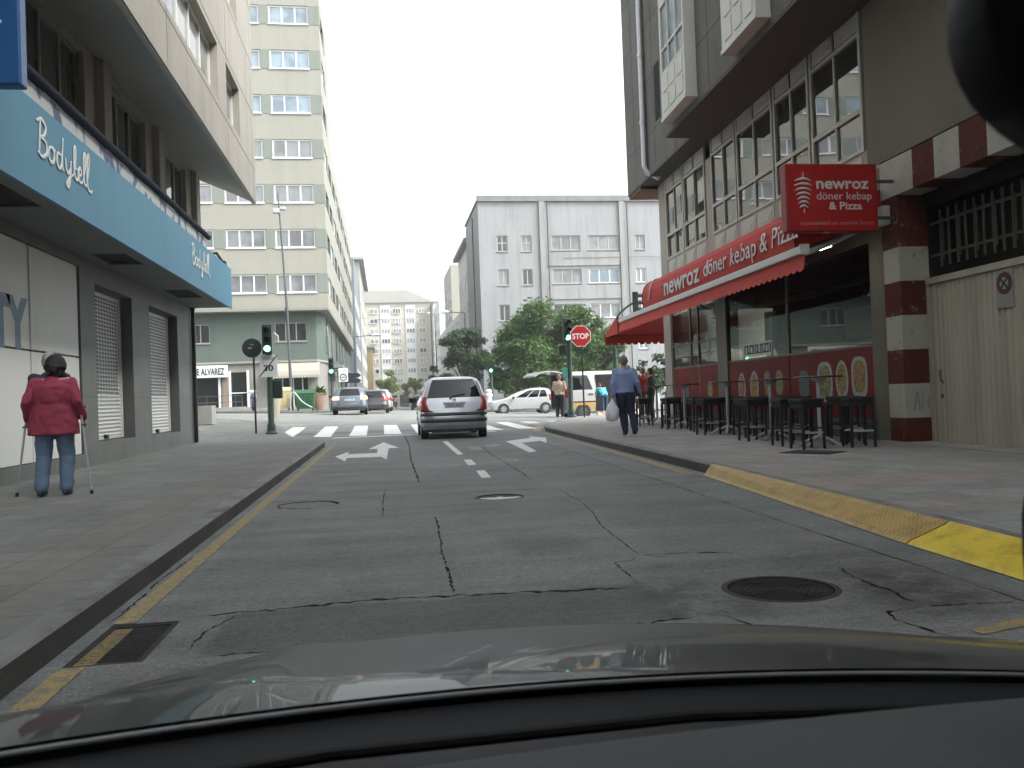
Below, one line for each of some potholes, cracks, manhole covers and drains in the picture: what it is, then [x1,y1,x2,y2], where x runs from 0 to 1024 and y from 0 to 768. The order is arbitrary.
crack [638,615,751,624]
manhole cover [721,576,842,603]
crack [190,446,728,658]
drain grate [64,622,179,668]
crack [839,567,1014,636]
